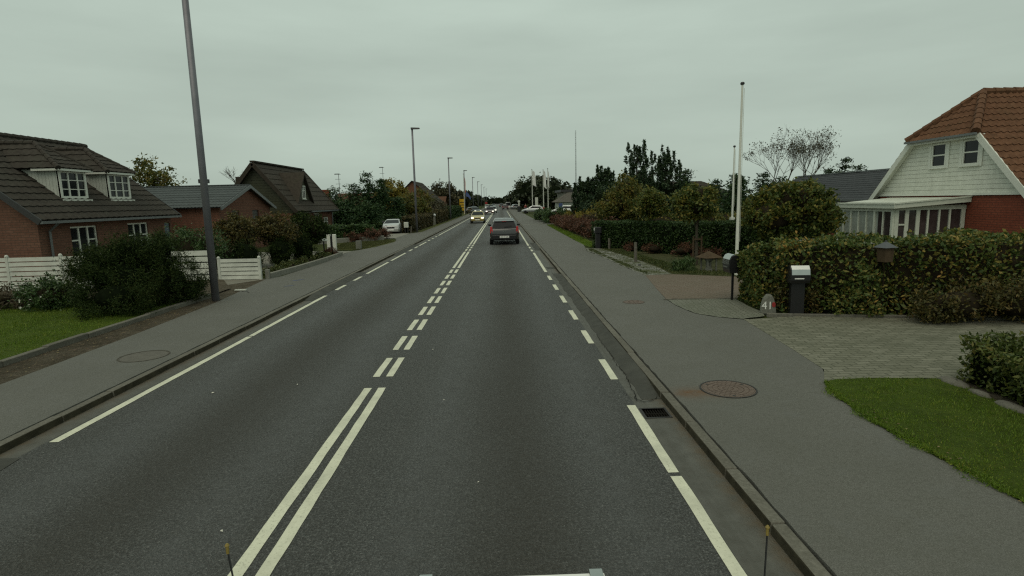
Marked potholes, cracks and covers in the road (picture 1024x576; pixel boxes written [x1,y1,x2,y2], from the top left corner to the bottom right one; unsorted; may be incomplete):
drain grate [639,407,673,419]
manhole cover [699,380,758,398]
manhole cover [117,350,170,363]
